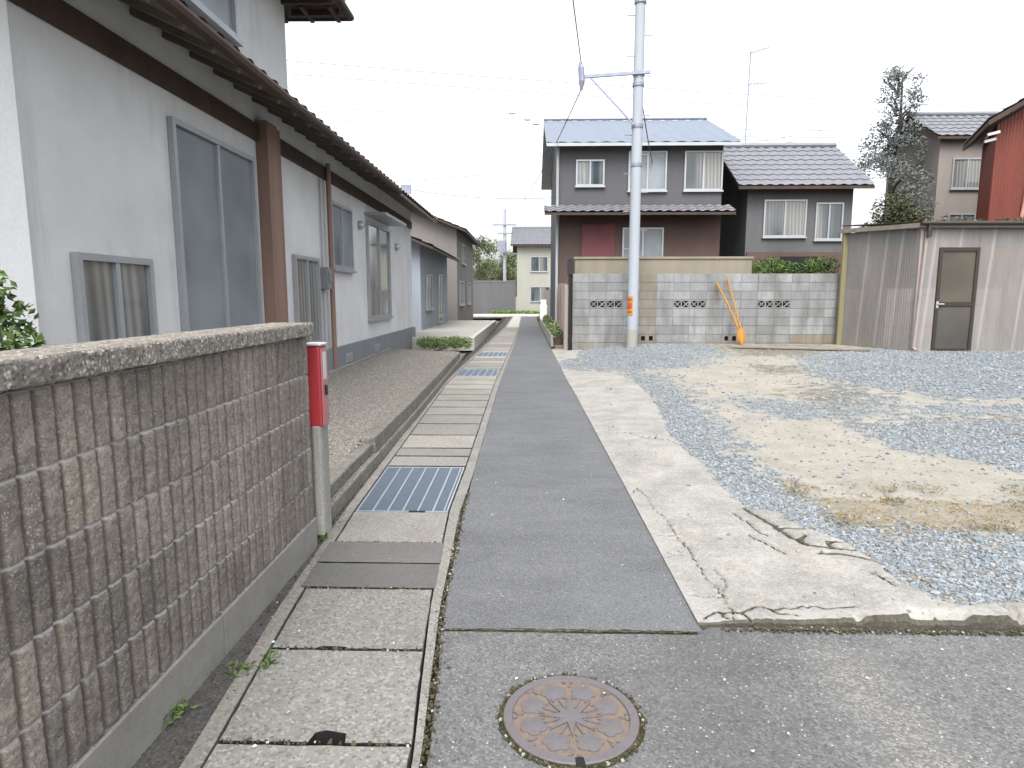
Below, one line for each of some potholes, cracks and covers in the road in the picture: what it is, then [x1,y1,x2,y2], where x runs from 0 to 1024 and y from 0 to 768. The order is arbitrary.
drain grate [356,466,465,517]
crack [732,508,895,586]
manhole cover [499,675,645,768]
crack [445,488,855,634]
